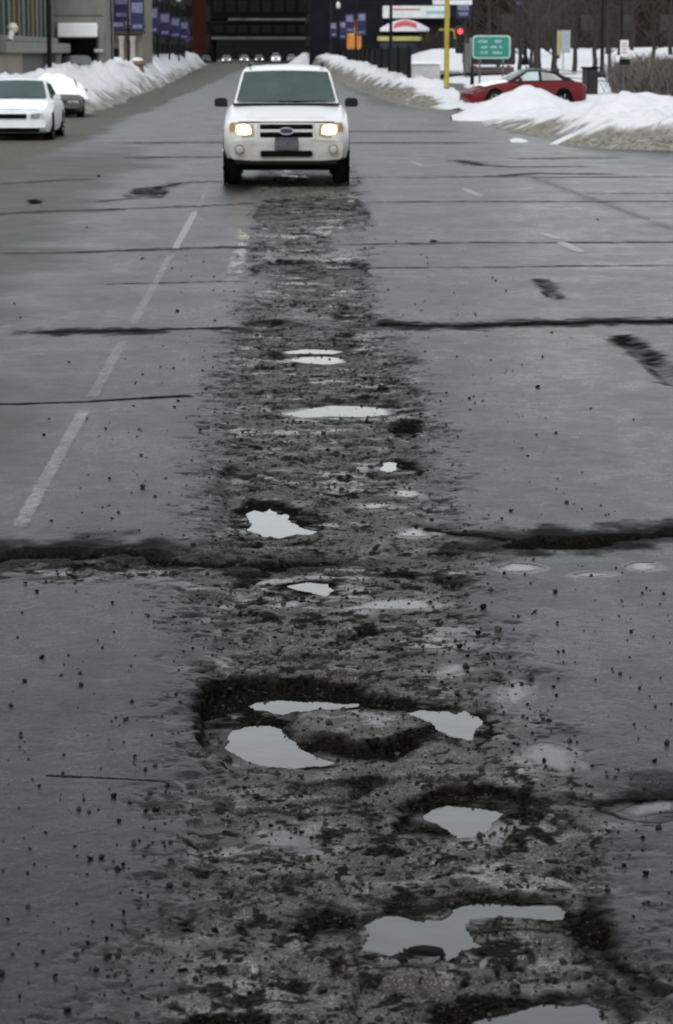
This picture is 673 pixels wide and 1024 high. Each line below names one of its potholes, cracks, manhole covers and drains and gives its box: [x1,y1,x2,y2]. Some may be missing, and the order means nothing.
pothole [423,990,638,1024]
pothole [190,674,505,778]
pothole [391,782,540,850]
pothole [267,581,362,609]
pothole [267,395,404,424]
pothole [341,887,584,974]
pothole [267,343,365,377]
crack [43,774,184,788]
pothole [227,498,329,548]
